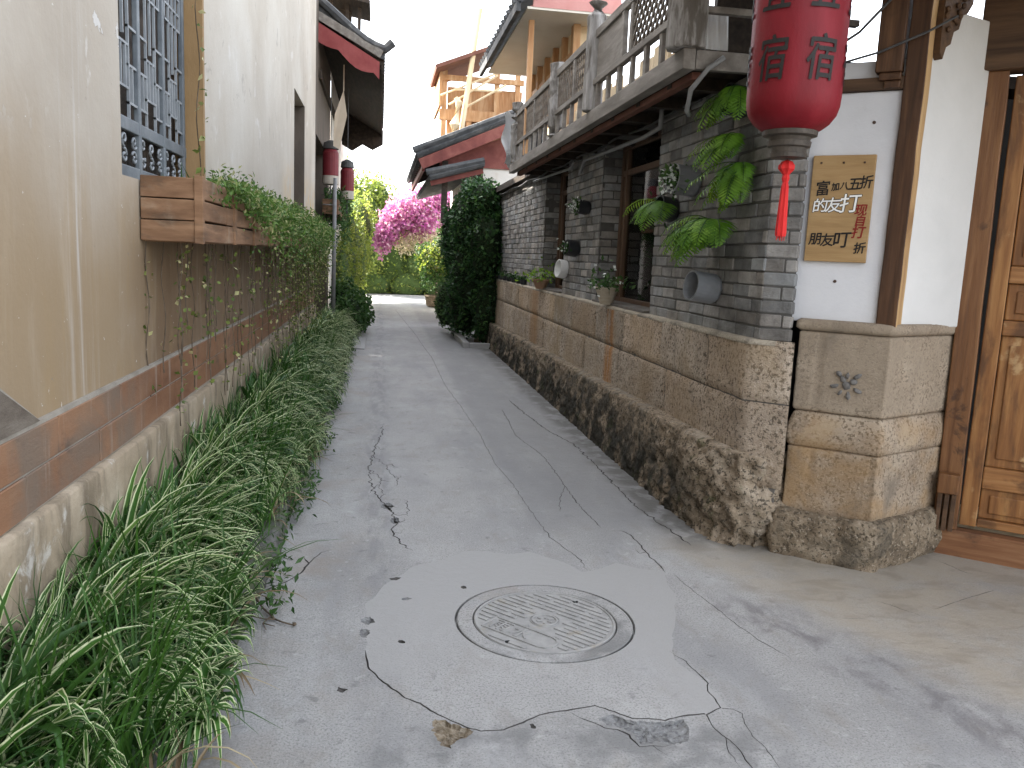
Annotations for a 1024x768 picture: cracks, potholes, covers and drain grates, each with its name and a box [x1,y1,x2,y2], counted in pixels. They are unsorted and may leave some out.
pothole [599,714,689,745]
crack [367,427,412,550]
crack [365,651,777,768]
crack [503,412,601,528]
manhole cover [455,585,635,664]
crack [623,531,787,656]
